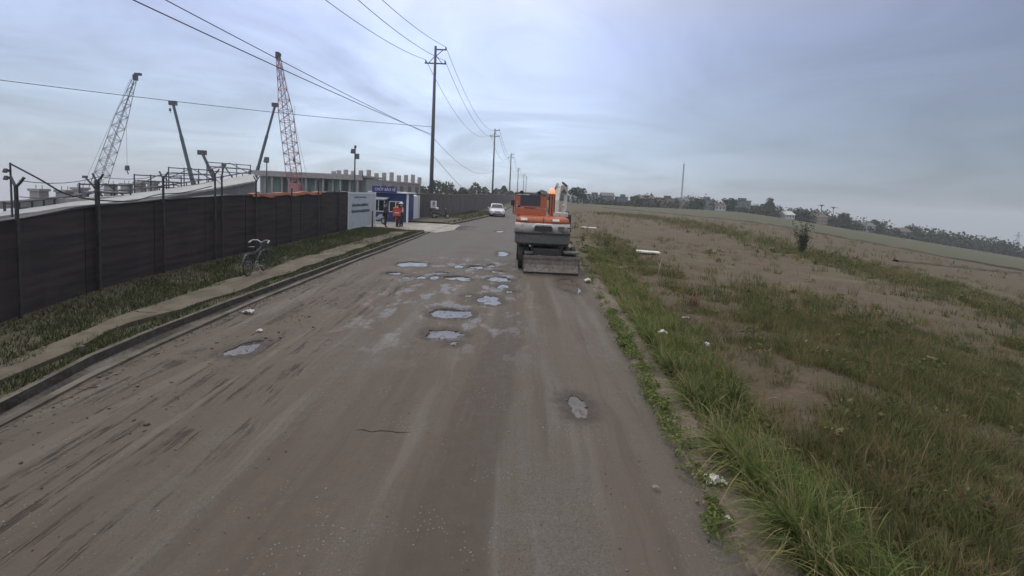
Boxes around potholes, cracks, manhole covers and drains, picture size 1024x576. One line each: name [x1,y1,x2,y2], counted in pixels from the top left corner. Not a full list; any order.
pothole [222,339,264,356]
pothole [476,295,502,305]
pothole [429,308,473,318]
pothole [425,330,466,339]
pothole [565,395,588,419]
